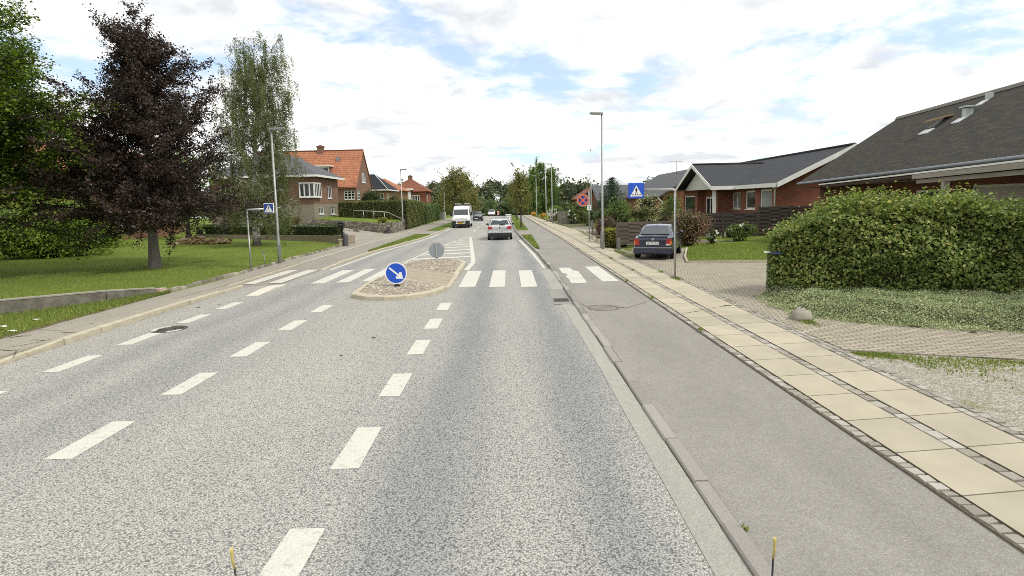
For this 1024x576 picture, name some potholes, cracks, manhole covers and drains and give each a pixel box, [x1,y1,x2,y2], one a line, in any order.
manhole cover [151,325,188,333]
